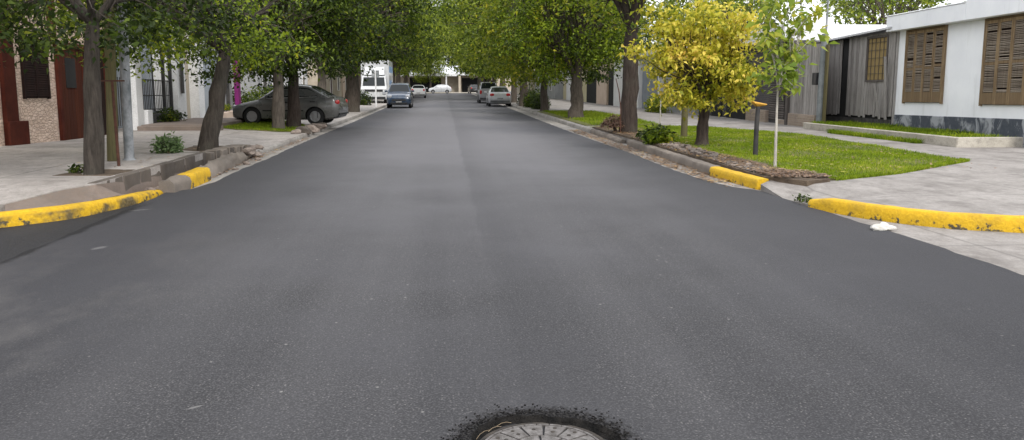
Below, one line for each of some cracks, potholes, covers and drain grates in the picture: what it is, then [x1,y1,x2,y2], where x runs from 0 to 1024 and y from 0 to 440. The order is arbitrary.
manhole cover [441,403,643,440]
